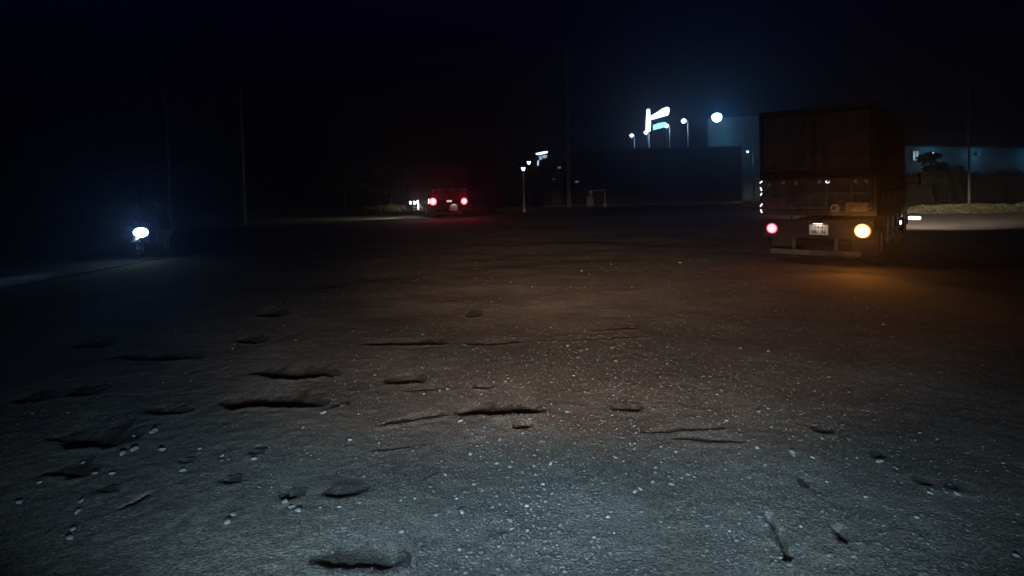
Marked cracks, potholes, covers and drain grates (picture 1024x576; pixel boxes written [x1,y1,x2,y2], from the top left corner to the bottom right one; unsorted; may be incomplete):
pothole [103,353,207,361]
pothole [216,389,333,410]
pothole [453,404,546,416]
crack [376,414,452,428]
pothole [382,374,427,384]
pothole [320,479,370,498]
pothole [307,541,412,571]
pothole [608,400,645,412]
pothole [248,365,344,379]
crack [355,329,655,346]
pothole [46,419,151,450]
crack [769,522,787,561]
